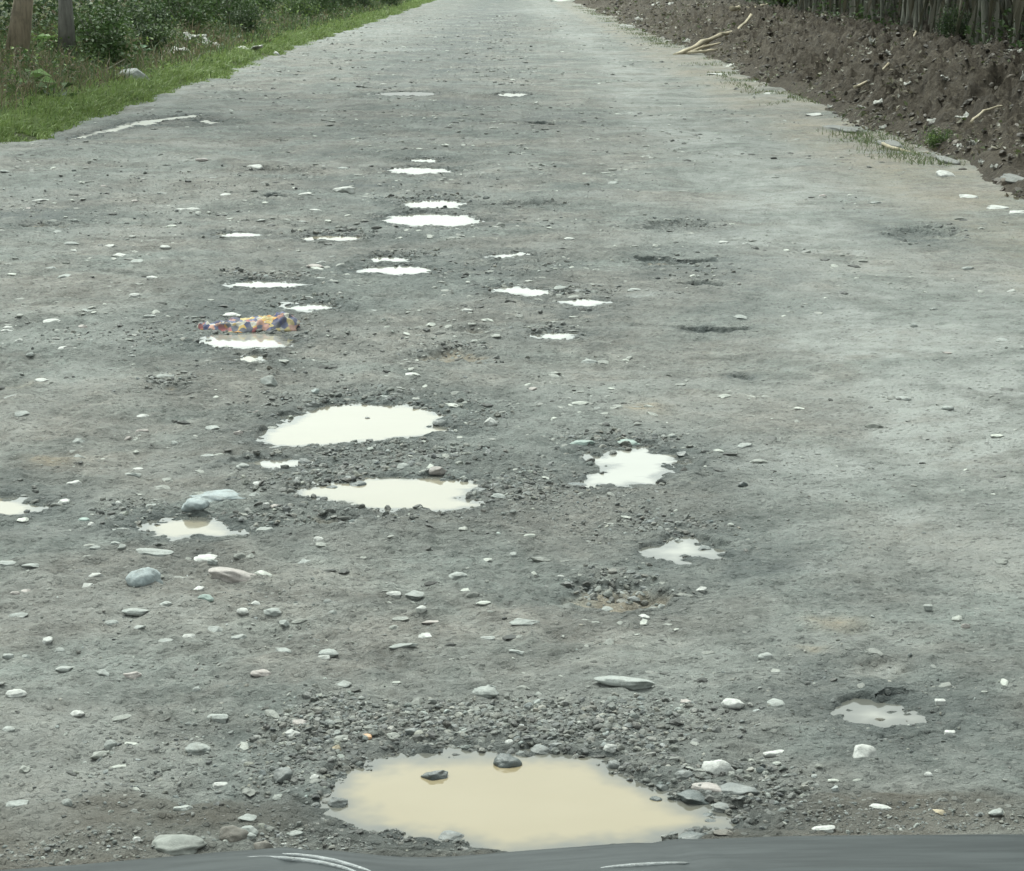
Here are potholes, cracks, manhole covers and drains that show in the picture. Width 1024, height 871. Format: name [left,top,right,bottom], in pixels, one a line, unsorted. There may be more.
pothole [0,484,74,523]
pothole [347,208,508,230]
pothole [281,730,785,856]
pothole [253,295,366,316]
pothole [232,396,479,452]
pothole [109,510,262,546]
pothole [801,680,968,739]
pothole [506,325,608,345]
pothole [326,261,468,278]
pothole [537,438,710,495]
pothole [375,195,489,211]
pothole [263,467,513,519]
